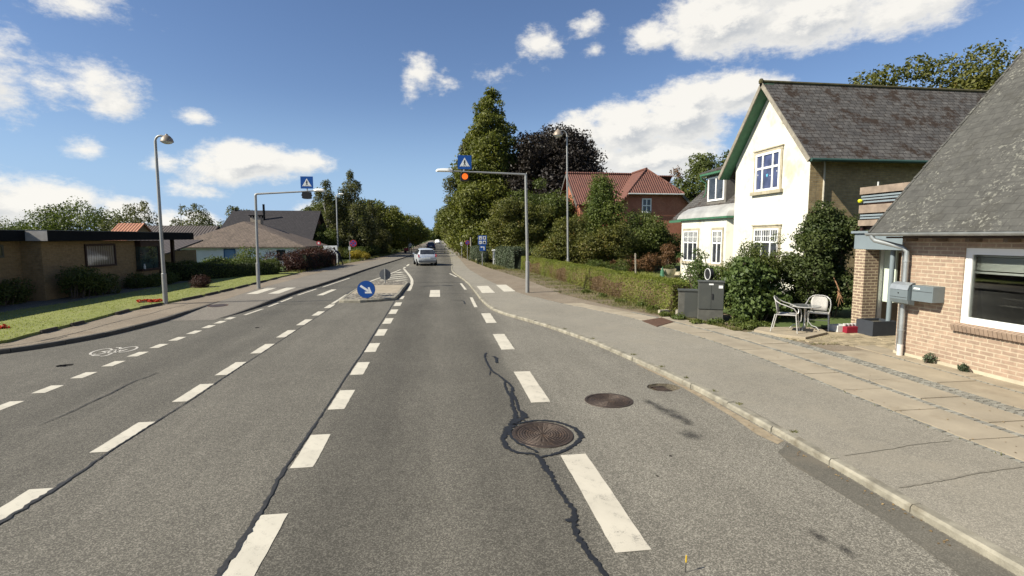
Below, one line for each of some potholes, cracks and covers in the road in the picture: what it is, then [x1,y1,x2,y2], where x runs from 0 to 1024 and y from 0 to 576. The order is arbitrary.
crack [37,374,153,426]
manhole cover [584,393,633,408]
manhole cover [512,422,574,448]
manhole cover [642,317,674,327]
